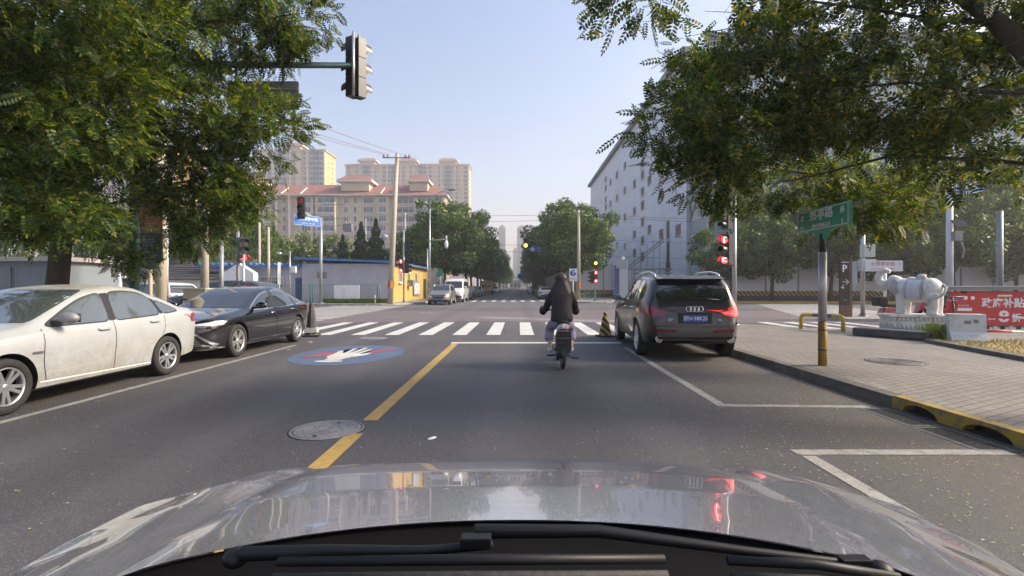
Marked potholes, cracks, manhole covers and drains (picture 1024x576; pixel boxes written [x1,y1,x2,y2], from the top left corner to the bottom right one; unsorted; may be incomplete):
manhole cover [287,420,366,441]
manhole cover [864,358,929,366]
